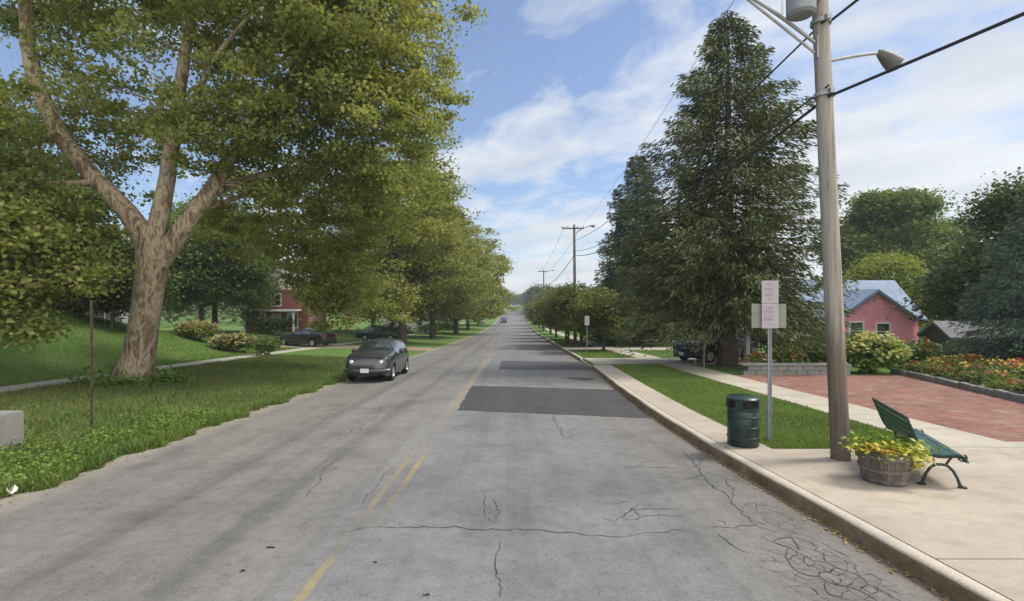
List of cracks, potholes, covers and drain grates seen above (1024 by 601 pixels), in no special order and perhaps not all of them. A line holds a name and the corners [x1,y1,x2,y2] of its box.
crack [752,501,901,601]
crack [627,452,757,552]
crack [323,491,682,596]
